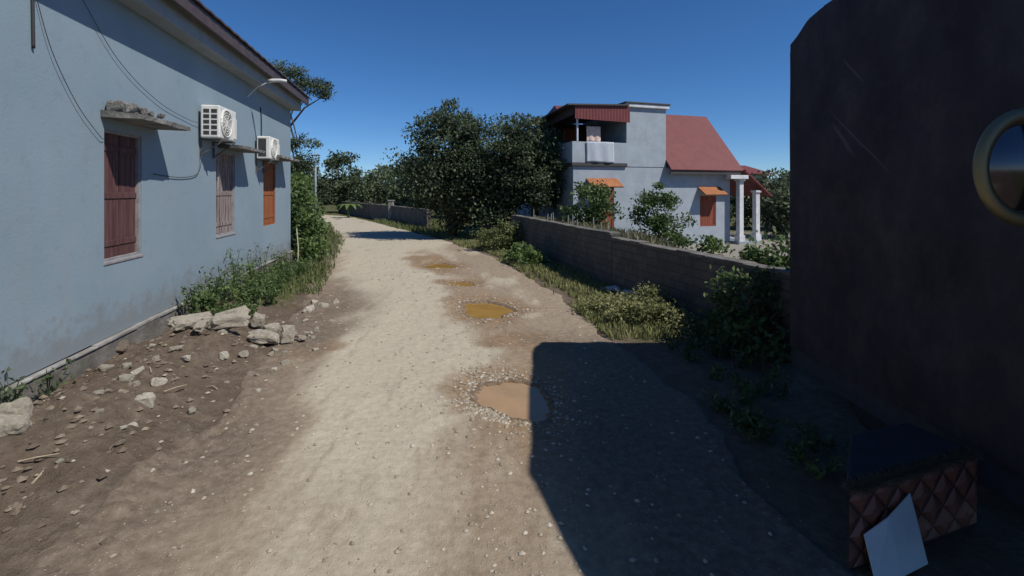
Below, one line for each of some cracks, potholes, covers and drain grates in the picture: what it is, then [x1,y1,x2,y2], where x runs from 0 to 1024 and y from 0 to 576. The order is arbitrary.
pothole [460,300,520,320]
pothole [469,378,558,426]
